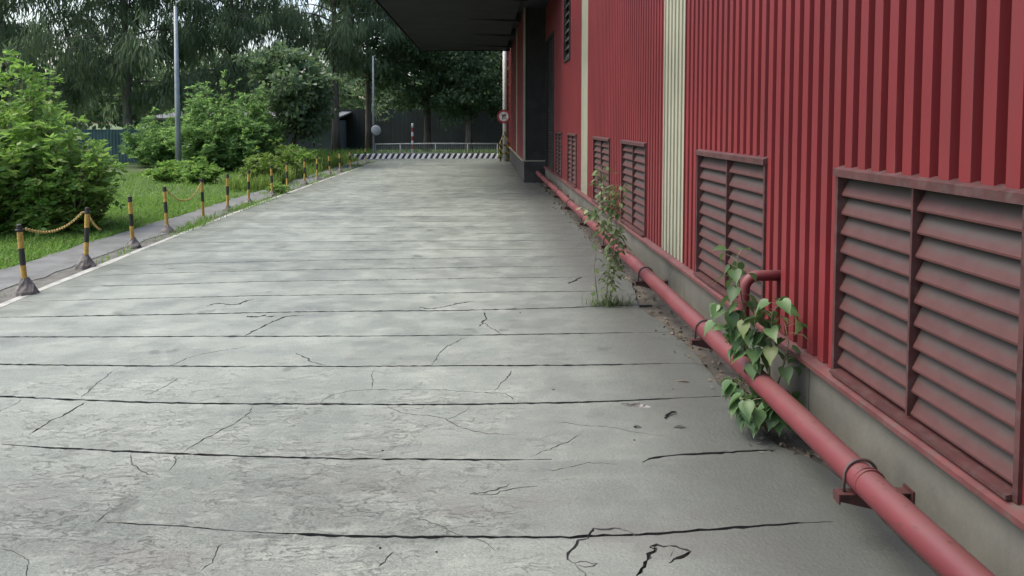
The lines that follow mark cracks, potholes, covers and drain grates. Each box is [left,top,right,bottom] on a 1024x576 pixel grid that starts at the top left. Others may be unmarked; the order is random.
crack [470,422,663,495]
crack [420,301,502,363]
crack [32,371,113,433]
crack [130,407,252,478]
crack [566,527,691,576]
